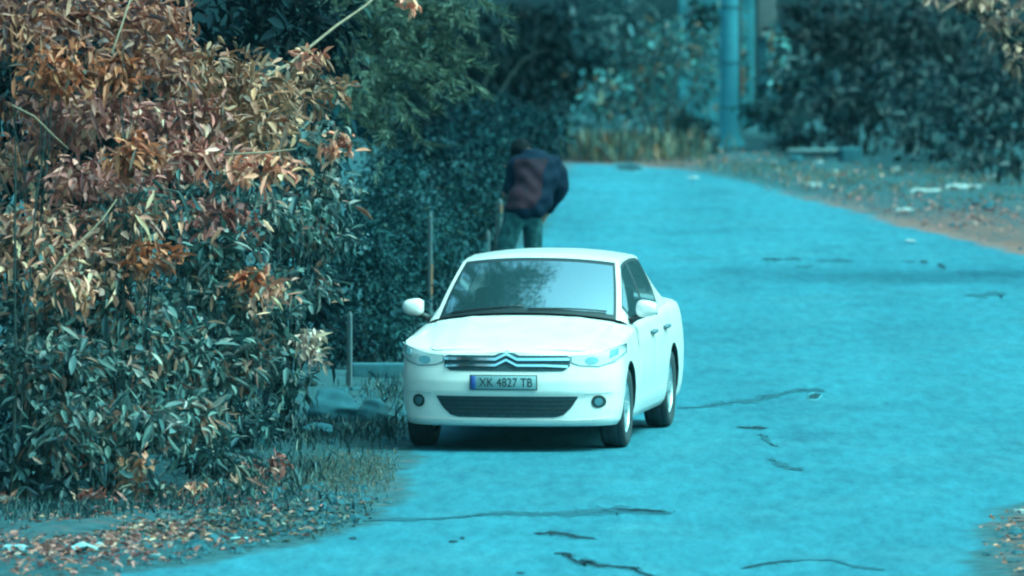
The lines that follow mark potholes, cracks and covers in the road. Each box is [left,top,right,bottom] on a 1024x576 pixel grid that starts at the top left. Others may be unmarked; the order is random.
crack [762,257,853,268]
crack [736,425,804,471]
crack [369,505,675,576]
crack [679,387,826,409]
crack [964,290,1007,299]
crack [743,559,884,570]
